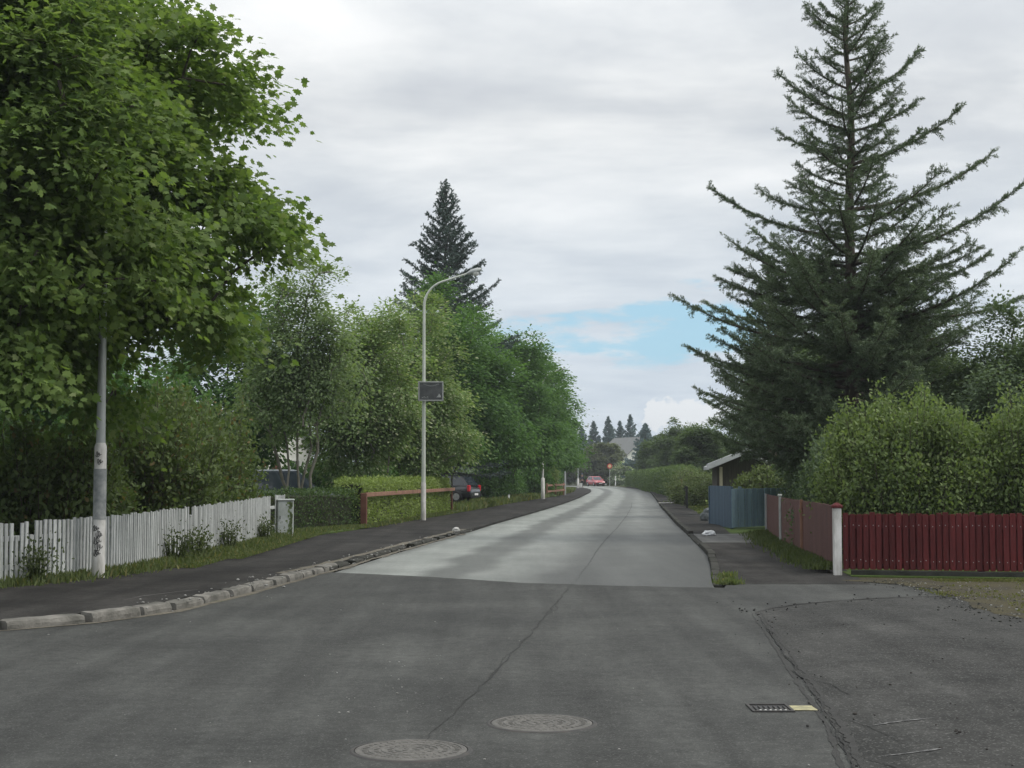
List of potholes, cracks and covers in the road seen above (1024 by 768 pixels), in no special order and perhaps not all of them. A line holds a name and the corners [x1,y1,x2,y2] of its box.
crack [402,504,632,765]
manhole cover [349,739,473,763]
drain grate [745,703,795,712]
manhole cover [486,714,597,733]
crack [738,594,948,768]
